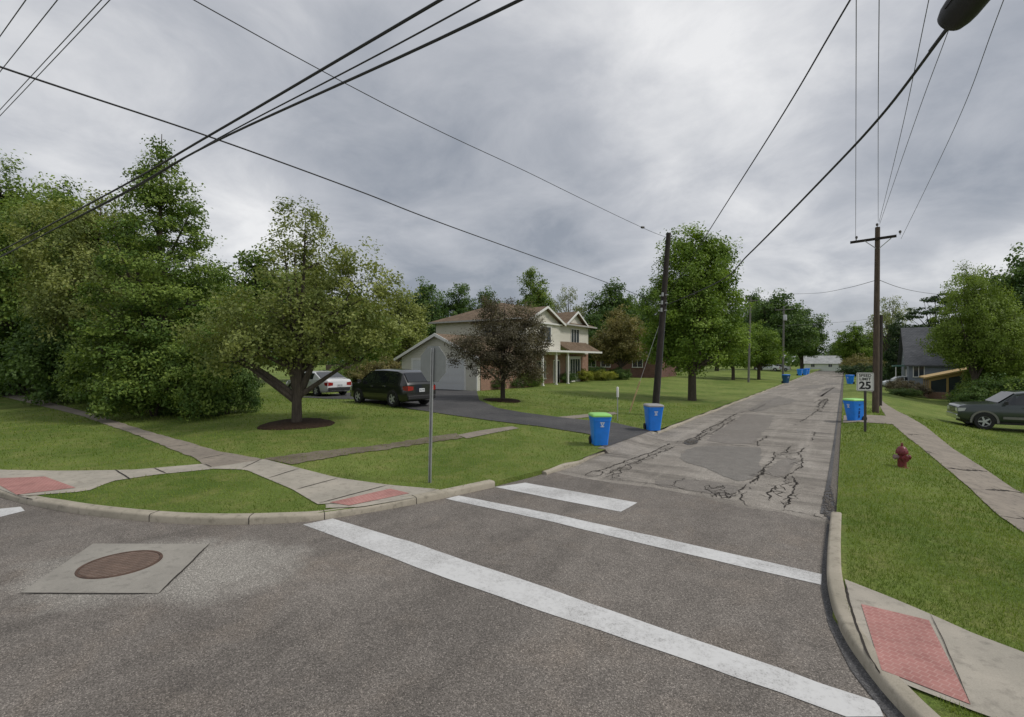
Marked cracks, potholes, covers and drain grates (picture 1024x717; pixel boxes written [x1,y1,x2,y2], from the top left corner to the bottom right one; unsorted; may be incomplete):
crack [585,399,829,507]
manhole cover [74,550,163,579]
